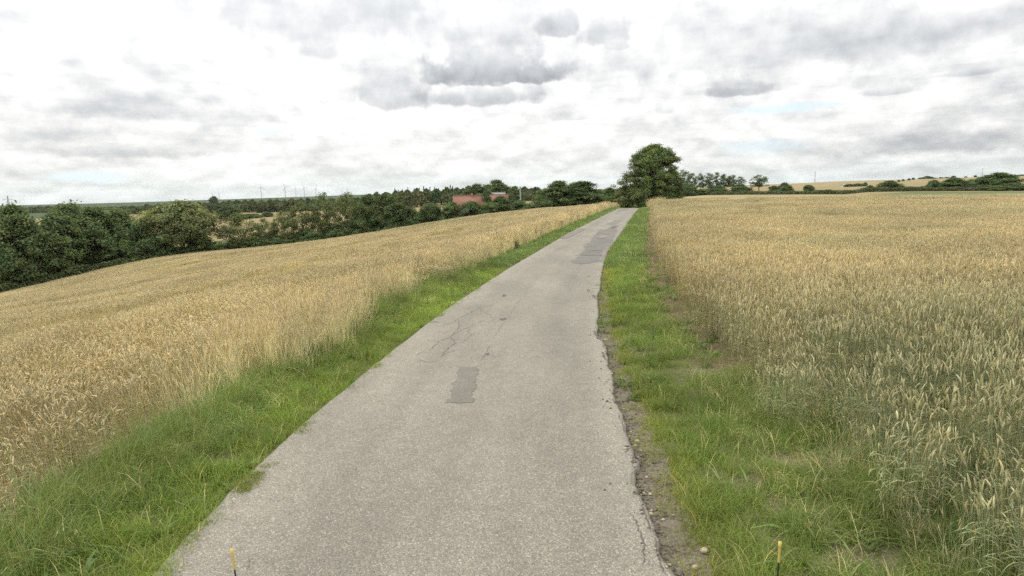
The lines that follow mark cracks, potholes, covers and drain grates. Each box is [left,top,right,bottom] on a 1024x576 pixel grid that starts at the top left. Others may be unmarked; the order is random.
crack [418,296,497,361]
crack [630,492,666,574]
